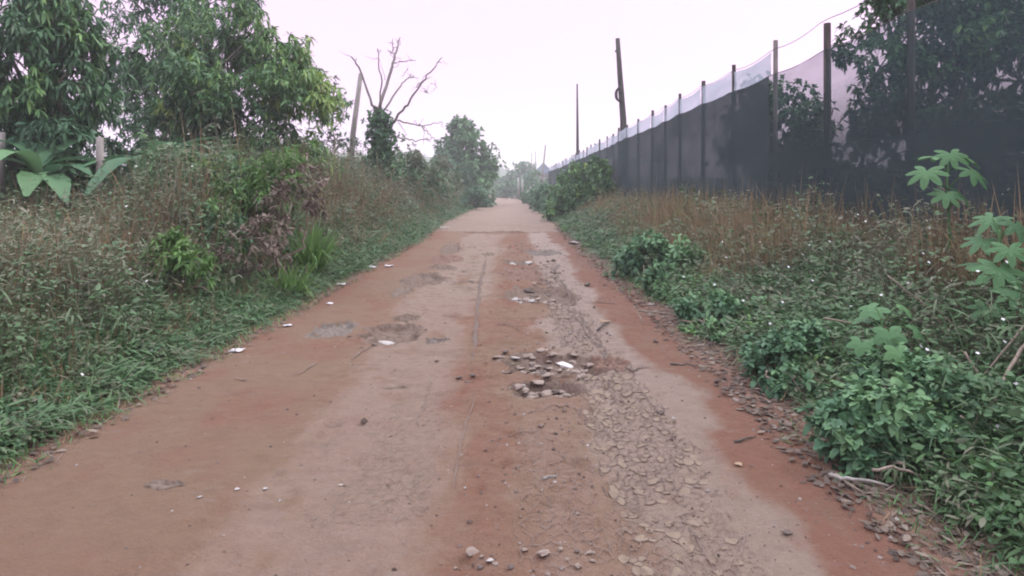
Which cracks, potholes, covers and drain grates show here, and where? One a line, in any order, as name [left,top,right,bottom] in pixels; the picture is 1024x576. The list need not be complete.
crack [503,248,771,576]
pothole [398,271,453,288]
pothole [355,322,426,346]
crack [453,391,478,492]
pothole [144,479,186,490]
pothole [500,285,582,306]
pothole [305,321,360,338]
pothole [391,313,421,322]
pothole [506,377,589,399]
pothole [426,337,451,345]
